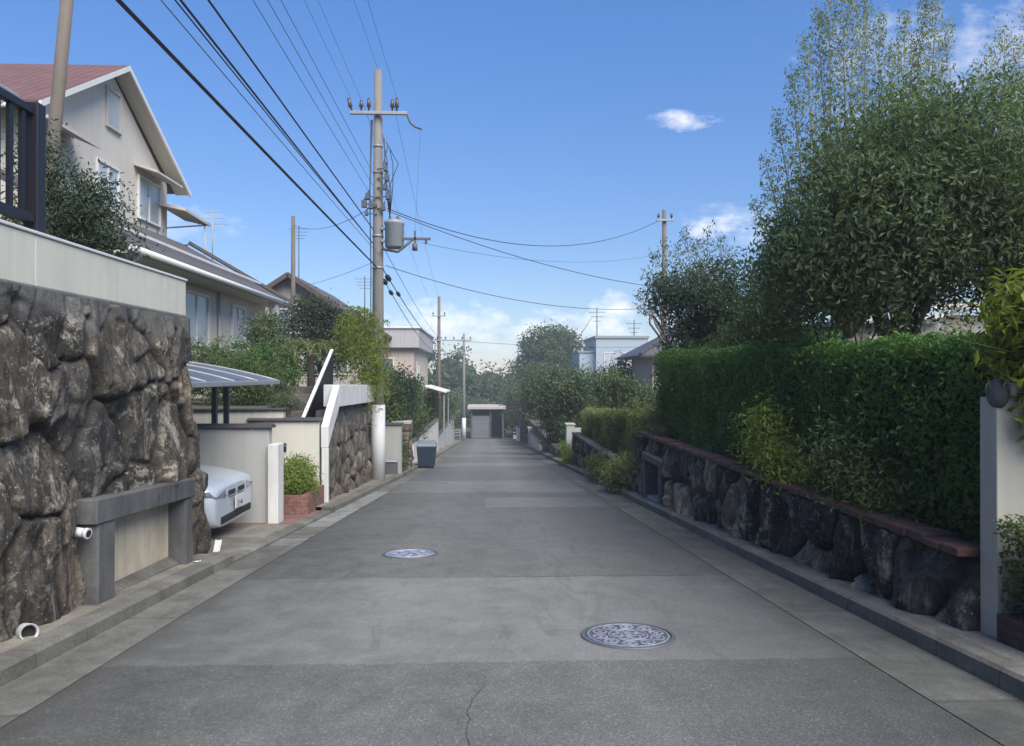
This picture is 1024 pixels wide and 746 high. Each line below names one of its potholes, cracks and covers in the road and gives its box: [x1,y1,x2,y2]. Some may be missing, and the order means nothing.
manhole cover [580,622,677,650]
crack [466,680,486,746]
manhole cover [382,549,438,559]
